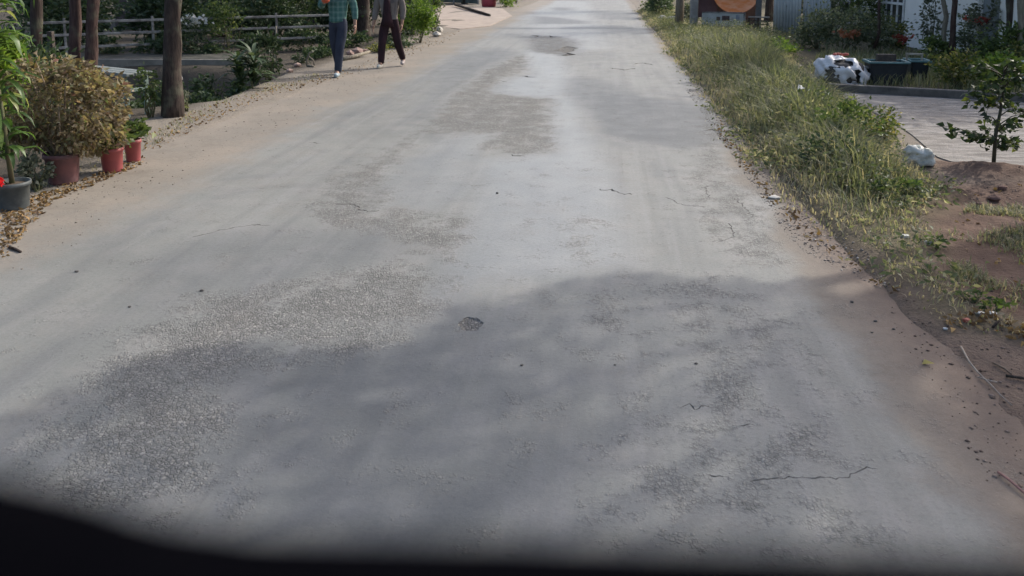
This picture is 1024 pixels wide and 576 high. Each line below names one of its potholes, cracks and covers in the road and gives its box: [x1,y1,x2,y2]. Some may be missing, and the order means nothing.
crack [750,466,873,482]
pothole [458,317,484,331]
